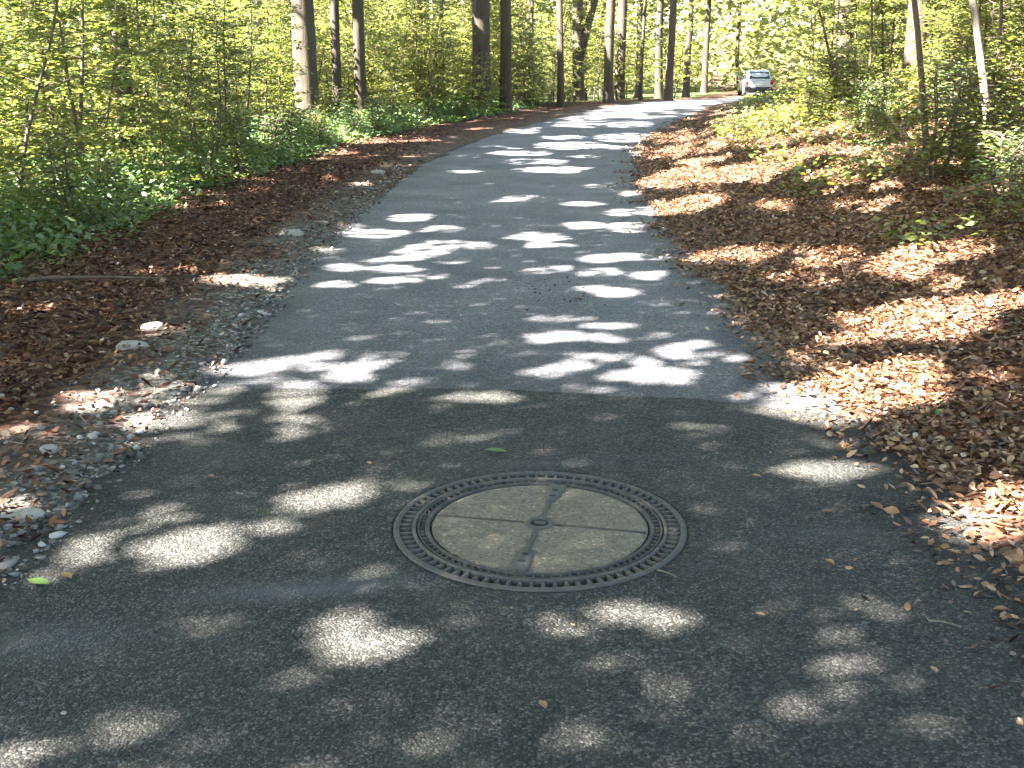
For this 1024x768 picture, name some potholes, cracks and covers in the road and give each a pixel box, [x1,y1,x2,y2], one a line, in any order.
manhole cover [393,471,687,592]
